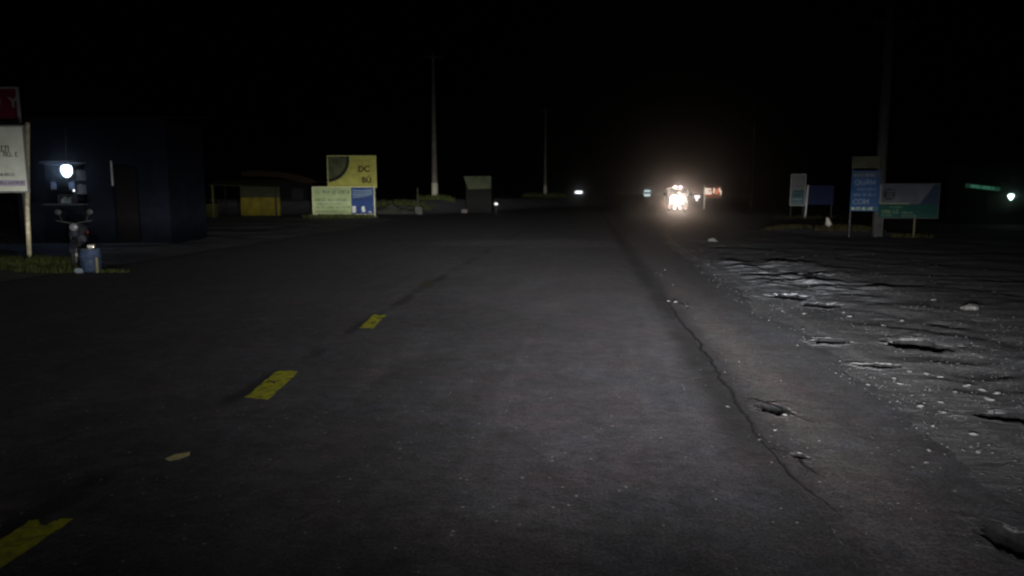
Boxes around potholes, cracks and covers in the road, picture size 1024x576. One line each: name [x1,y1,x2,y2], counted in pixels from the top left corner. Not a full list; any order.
pothole [801,337,858,347]
pothole [866,336,987,357]
pothole [933,408,1024,426]
pothole [787,451,815,463]
pothole [746,401,802,417]
crack [658,295,840,515]
pothole [751,293,817,302]
pothole [840,362,911,371]
pothole [792,301,849,310]
pothole [956,514,1024,566]
